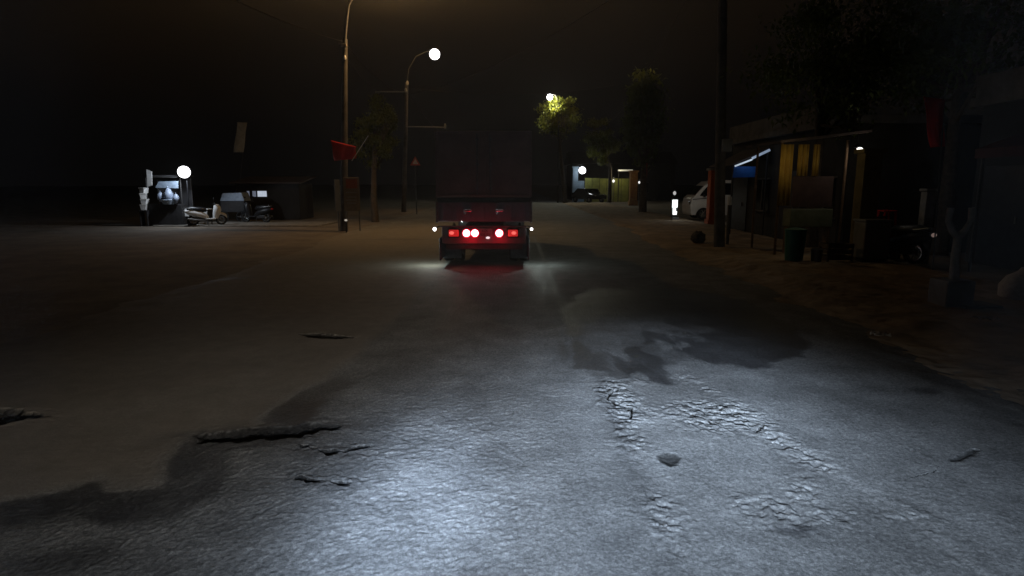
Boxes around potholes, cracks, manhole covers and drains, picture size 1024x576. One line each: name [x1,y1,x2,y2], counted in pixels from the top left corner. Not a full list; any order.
pothole [191,421,343,445]
pothole [655,452,684,468]
crack [605,387,644,420]
pothole [946,447,983,462]
crack [676,405,778,433]
pothole [299,332,355,340]
pothole [0,407,53,426]
